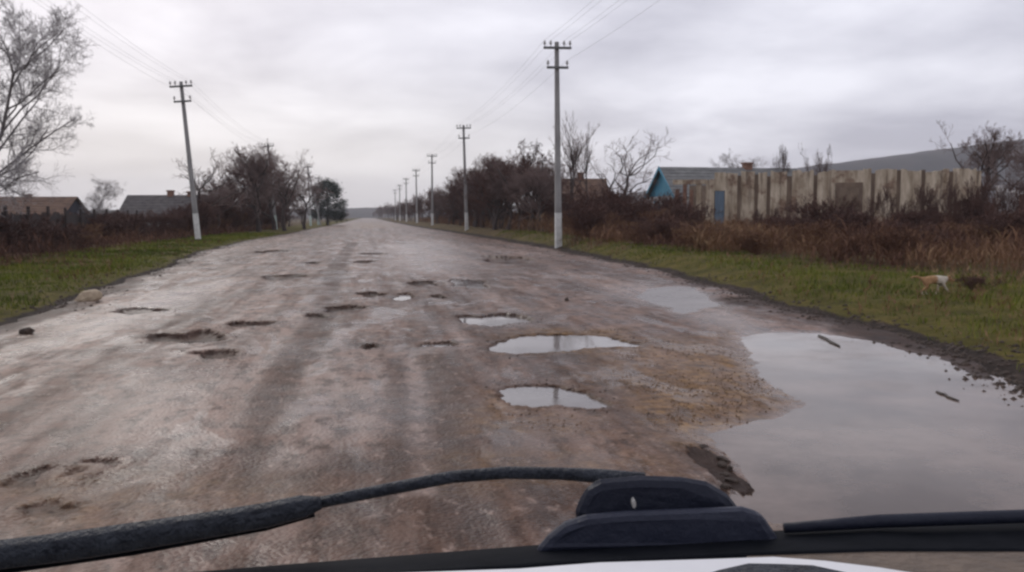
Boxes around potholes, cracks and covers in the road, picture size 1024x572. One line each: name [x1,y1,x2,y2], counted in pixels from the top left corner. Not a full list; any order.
pothole [217,320,285,329]
pothole [448,311,543,328]
pothole [101,306,179,316]
pothole [35,454,137,489]
pothole [178,347,250,361]
pothole [350,291,399,299]
pothole [135,328,238,345]
pothole [410,340,467,349]
pothole [373,291,421,302]
pothole [356,342,386,352]
pothole [677,440,754,496]
pothole [433,278,494,290]
